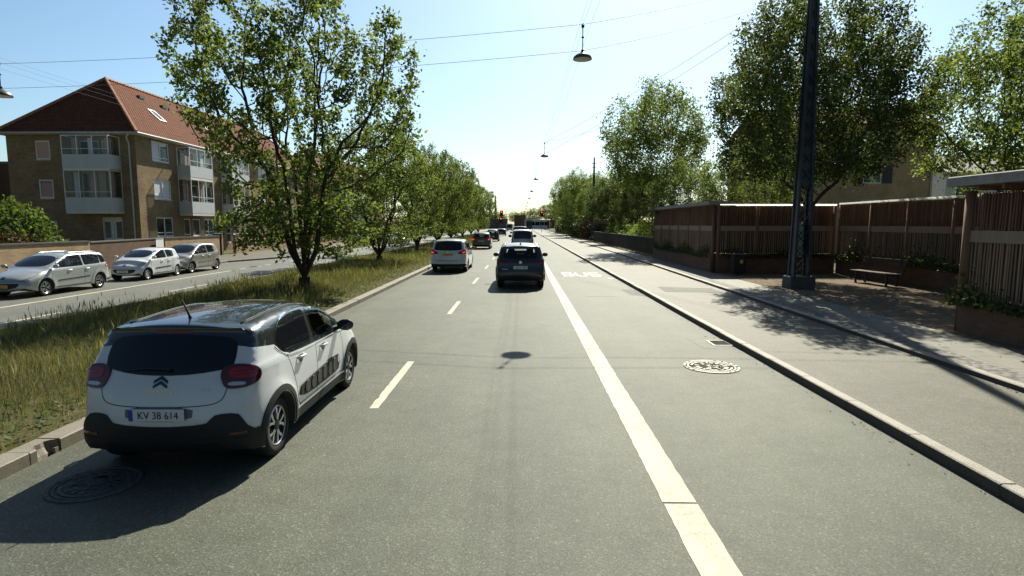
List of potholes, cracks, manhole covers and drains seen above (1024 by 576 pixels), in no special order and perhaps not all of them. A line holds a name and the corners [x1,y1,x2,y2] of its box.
manhole cover [683,360,741,374]
manhole cover [43,466,144,503]
